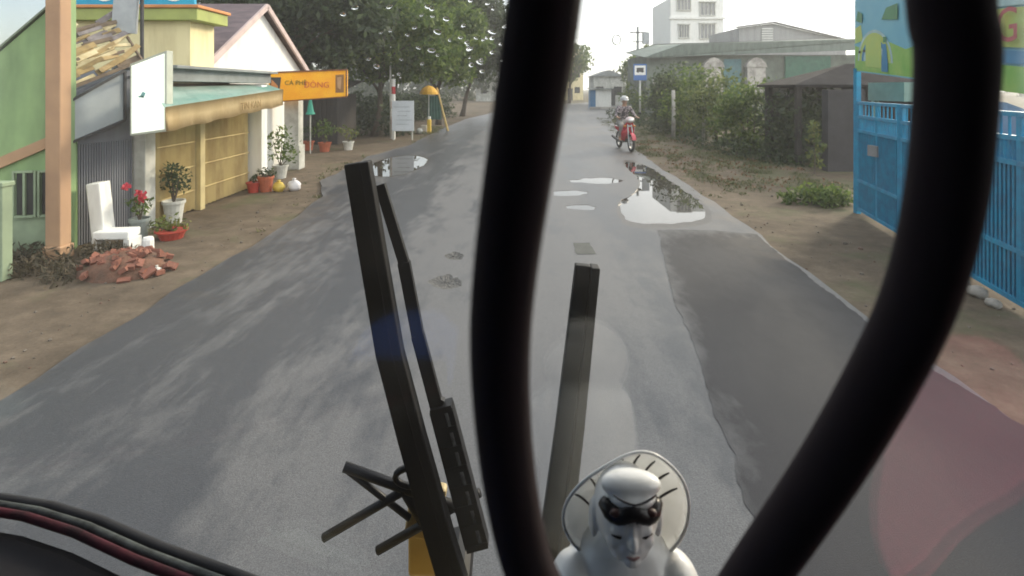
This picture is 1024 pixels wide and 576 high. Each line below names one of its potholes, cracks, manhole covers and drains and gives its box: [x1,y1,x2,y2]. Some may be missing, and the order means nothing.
pothole [428,274,462,289]
pothole [444,252,464,260]
